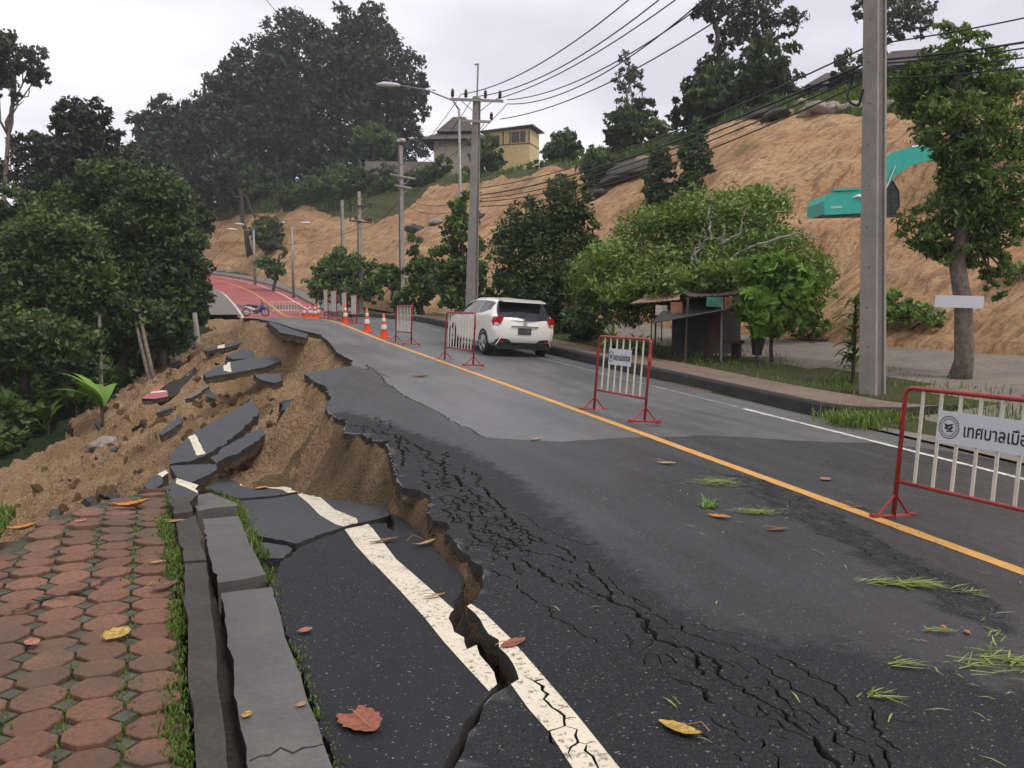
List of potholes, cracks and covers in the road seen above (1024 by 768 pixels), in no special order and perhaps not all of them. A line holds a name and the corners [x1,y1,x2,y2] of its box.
crack [399,441,874,755]
